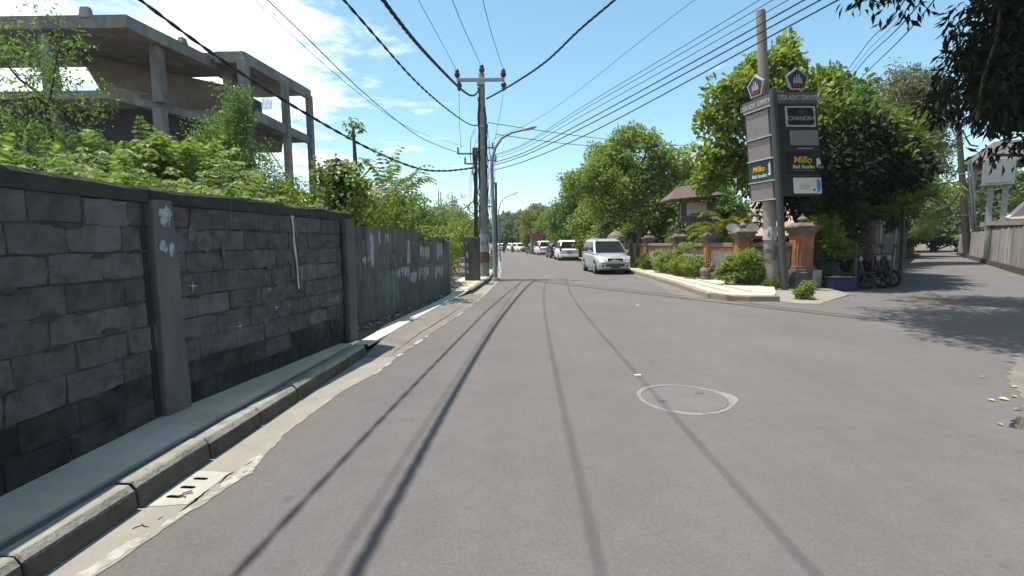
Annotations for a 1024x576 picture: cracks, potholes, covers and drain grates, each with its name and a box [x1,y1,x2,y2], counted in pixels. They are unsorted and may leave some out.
pothole [1009,416,1024,430]
manhole cover [637,385,738,415]
